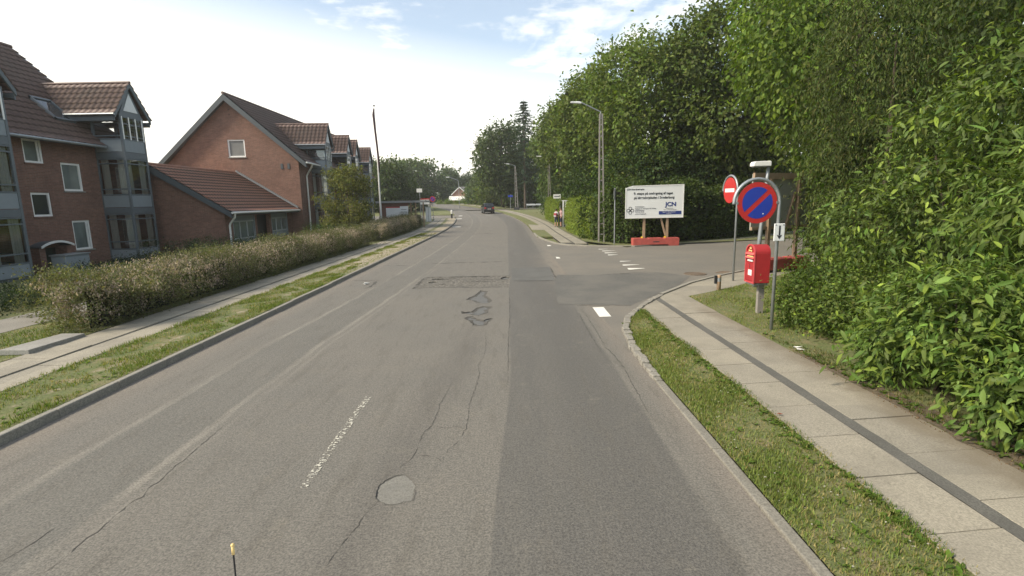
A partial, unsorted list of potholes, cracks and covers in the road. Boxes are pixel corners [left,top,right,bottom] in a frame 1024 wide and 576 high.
pothole [462,306,491,315]
pothole [466,290,492,303]
crack [322,300,490,573]
pothole [465,316,493,326]
